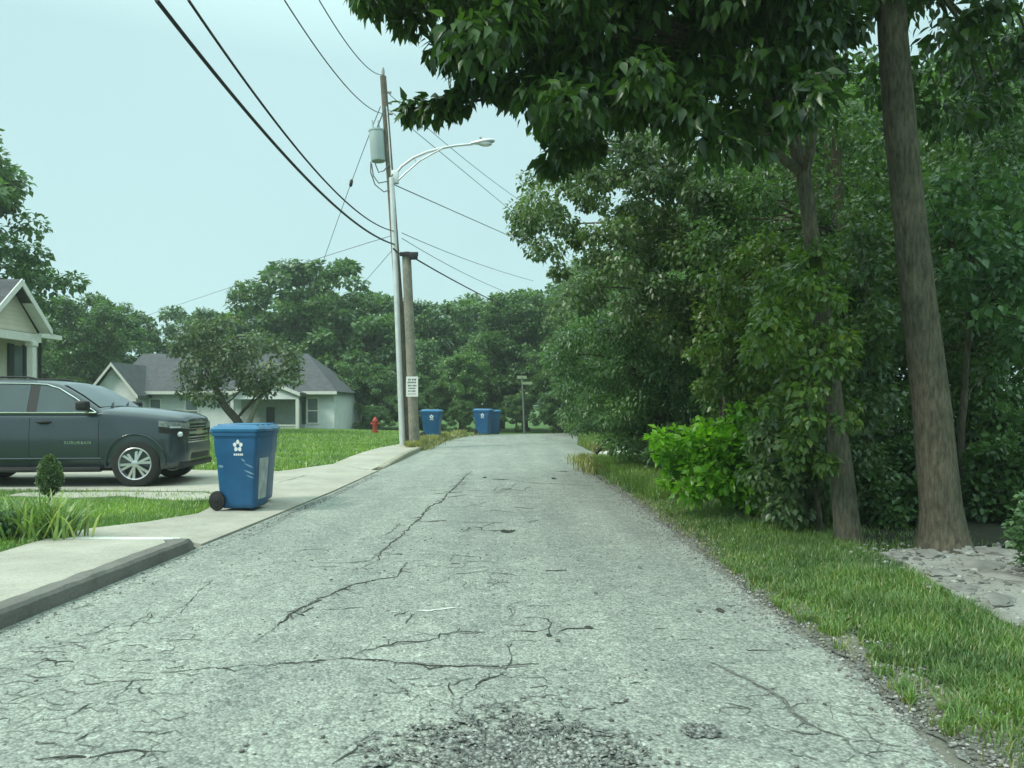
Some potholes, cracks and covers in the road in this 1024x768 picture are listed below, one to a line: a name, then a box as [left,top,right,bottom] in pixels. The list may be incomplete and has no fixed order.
pothole [681,722,722,738]
crack [0,472,597,768]
pothole [353,702,659,768]
crack [712,599,971,763]
